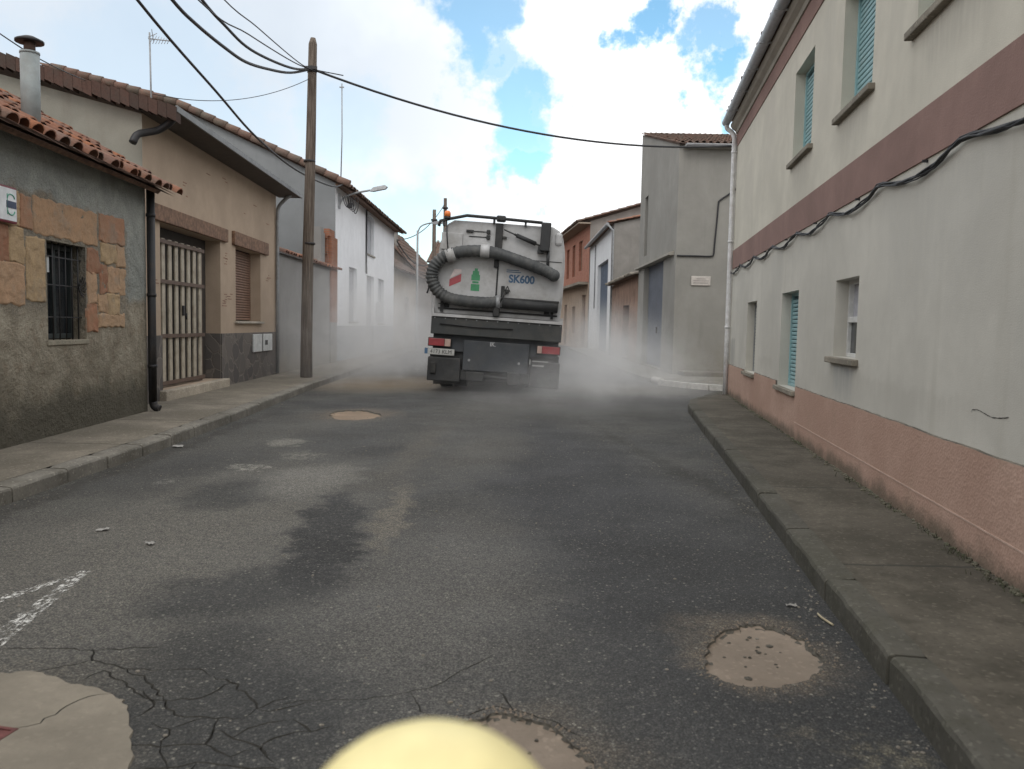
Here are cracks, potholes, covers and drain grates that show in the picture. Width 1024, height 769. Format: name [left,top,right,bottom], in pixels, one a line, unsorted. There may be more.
pothole [326,410,382,420]
crack [9,647,491,769]
pothole [692,618,838,694]
pothole [450,703,607,769]
